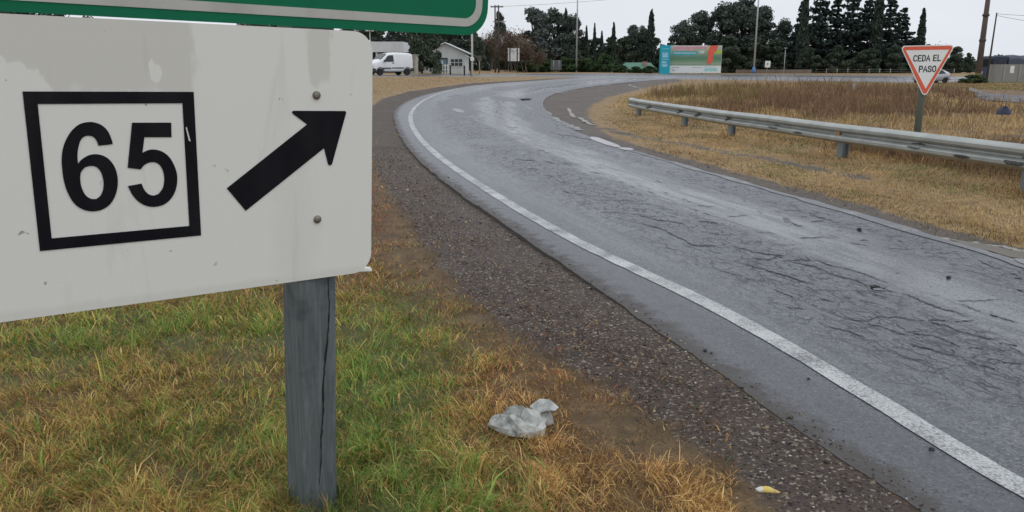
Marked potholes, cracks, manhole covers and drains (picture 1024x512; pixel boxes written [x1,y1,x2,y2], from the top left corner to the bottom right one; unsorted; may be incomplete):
crack [517,134,1023,398]
